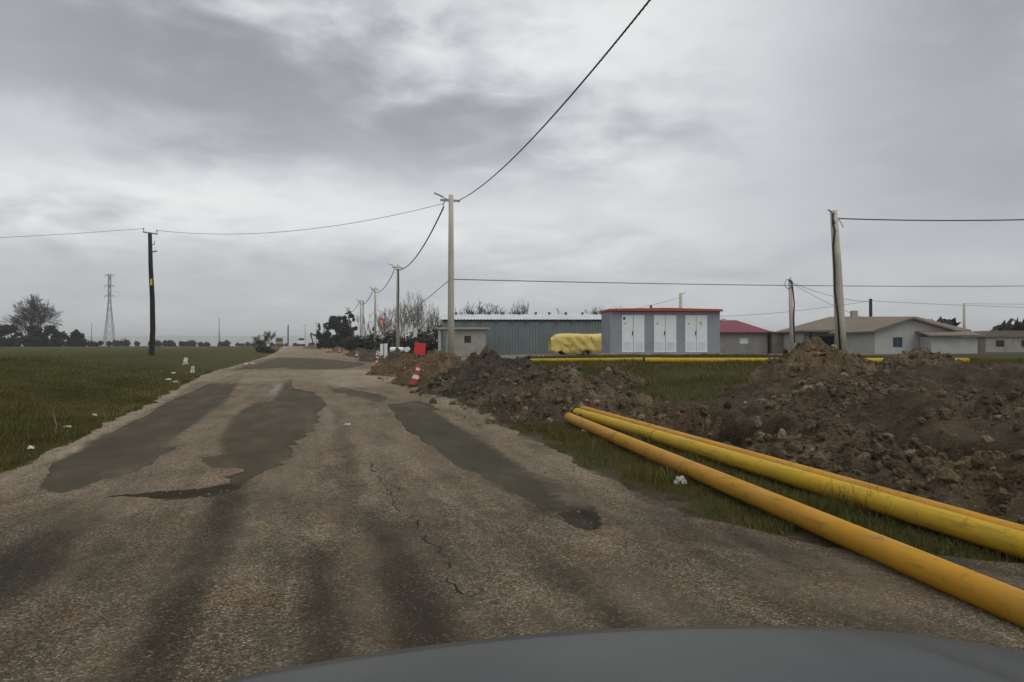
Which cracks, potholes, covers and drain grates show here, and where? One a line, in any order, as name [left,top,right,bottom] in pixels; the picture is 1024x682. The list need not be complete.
pothole [106,484,241,500]
crack [370,462,464,595]
pothole [557,508,603,531]
